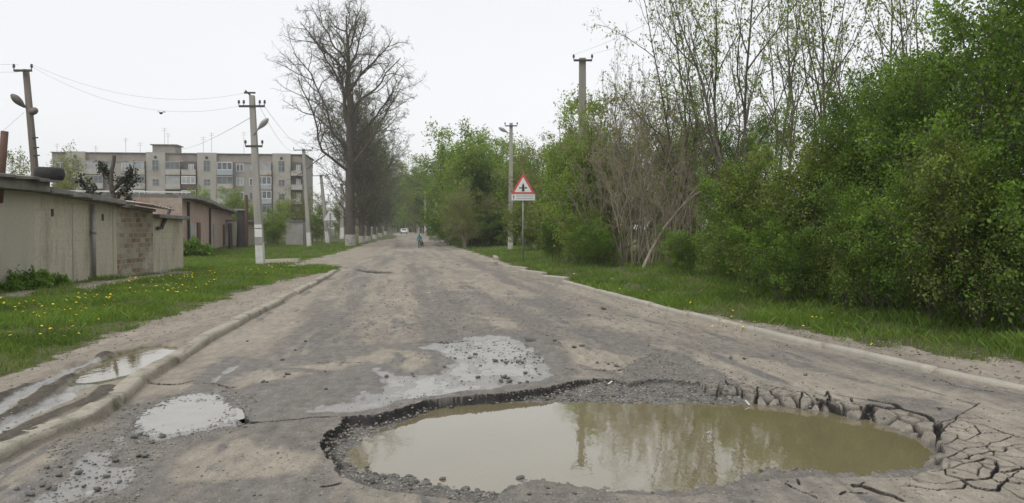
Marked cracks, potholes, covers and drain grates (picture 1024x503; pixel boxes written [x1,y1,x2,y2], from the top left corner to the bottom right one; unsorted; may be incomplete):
pothole [121,390,253,443]
pothole [59,341,188,396]
pothole [320,378,945,502]
crack [239,409,338,425]
crack [725,379,1024,502]
crack [149,380,237,389]
